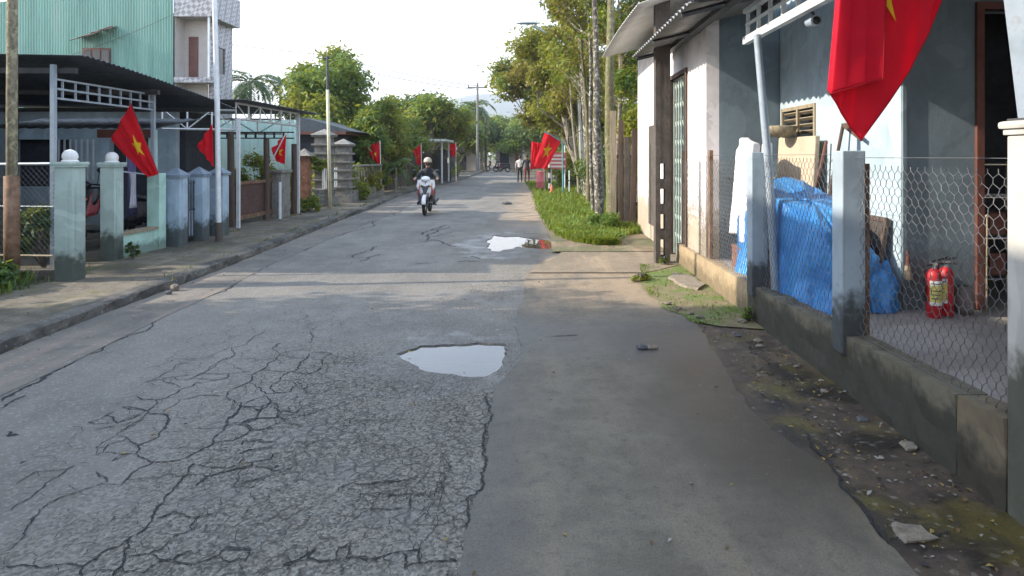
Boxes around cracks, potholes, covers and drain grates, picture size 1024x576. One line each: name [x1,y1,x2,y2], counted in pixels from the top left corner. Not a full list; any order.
pothole [396,342,508,368]
crack [420,225,480,262]
crack [0,307,471,576]
